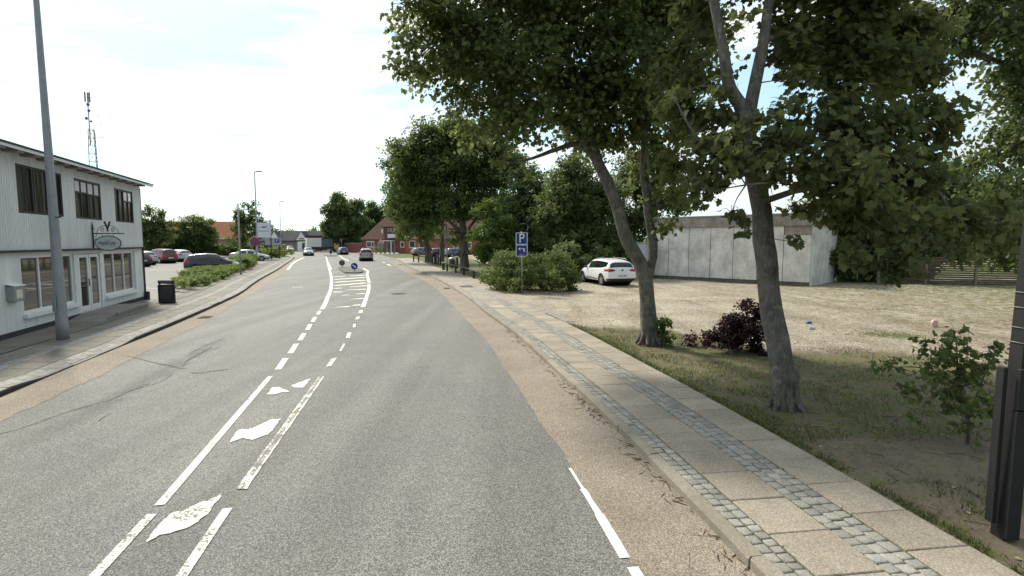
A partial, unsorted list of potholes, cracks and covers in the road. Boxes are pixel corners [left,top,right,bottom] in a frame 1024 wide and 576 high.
crack [1,340,226,434]
